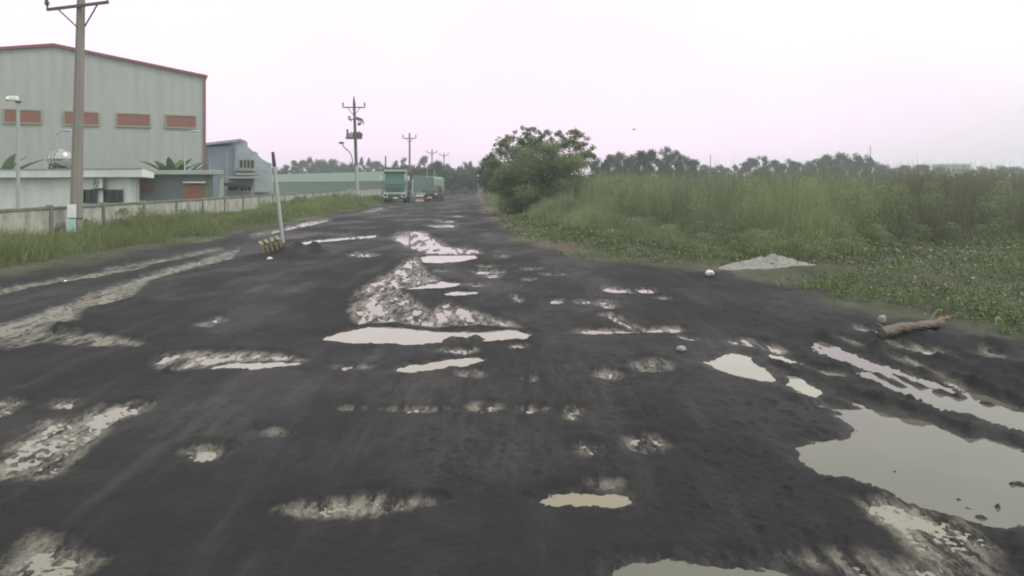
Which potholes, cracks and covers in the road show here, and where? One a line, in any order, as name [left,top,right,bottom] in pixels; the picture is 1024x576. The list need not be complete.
pothole [313,323,540,345]
pothole [778,365,841,398]
pothole [577,544,826,576]
pothole [778,391,1024,535]
pothole [149,357,315,371]
pothole [806,338,1024,434]
pothole [517,478,654,514]
pothole [401,279,464,290]
pothole [369,353,496,373]
pothole [413,254,483,263]
pothole [694,348,785,385]
